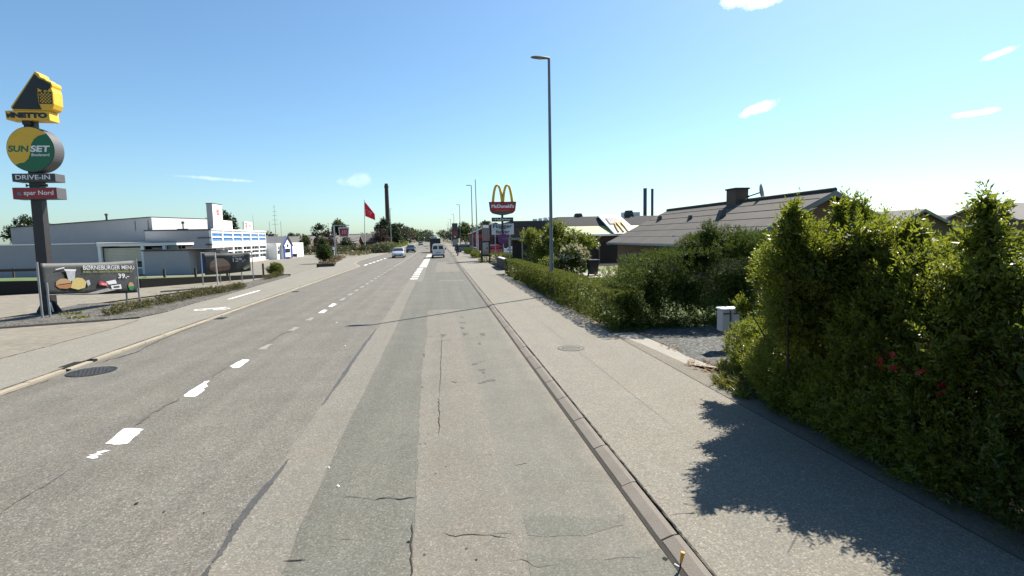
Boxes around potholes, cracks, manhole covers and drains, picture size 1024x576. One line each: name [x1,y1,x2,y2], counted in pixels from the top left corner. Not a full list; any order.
crack [430,336,445,433]
manhole cover [65,366,118,377]
